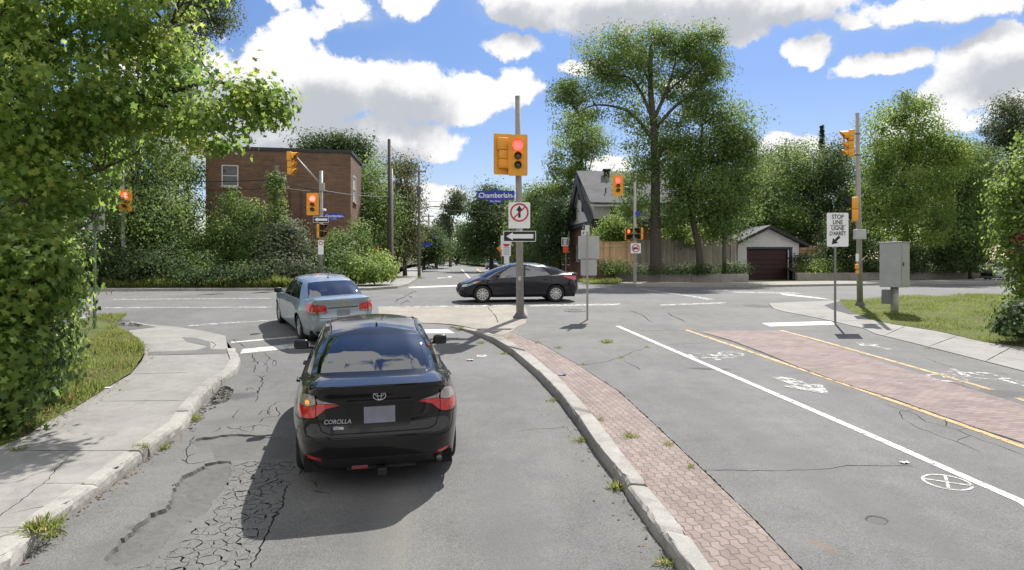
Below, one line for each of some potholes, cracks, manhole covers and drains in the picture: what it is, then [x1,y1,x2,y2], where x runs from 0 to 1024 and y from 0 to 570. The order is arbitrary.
crack [891,406,1022,455]
crack [216,339,280,432]
crack [117,460,329,570]
pothole [209,386,234,407]
crack [181,437,209,464]
manhole cover [864,515,890,525]
